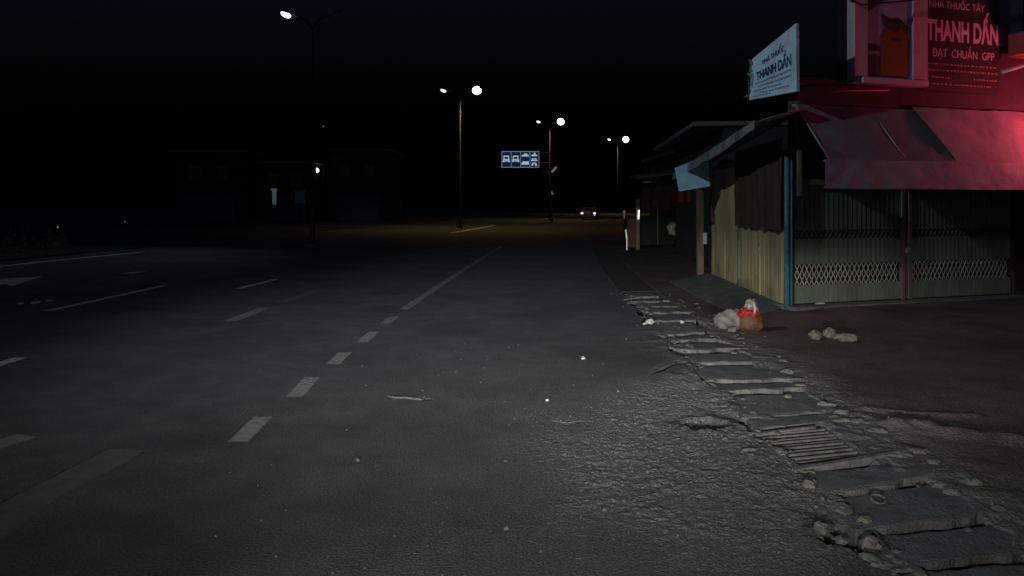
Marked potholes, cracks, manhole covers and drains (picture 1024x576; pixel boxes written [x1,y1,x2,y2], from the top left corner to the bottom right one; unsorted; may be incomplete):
crack [647,360,687,373]
pothole [801,519,882,561]
pothole [664,415,740,434]
drain grate [754,425,893,473]
